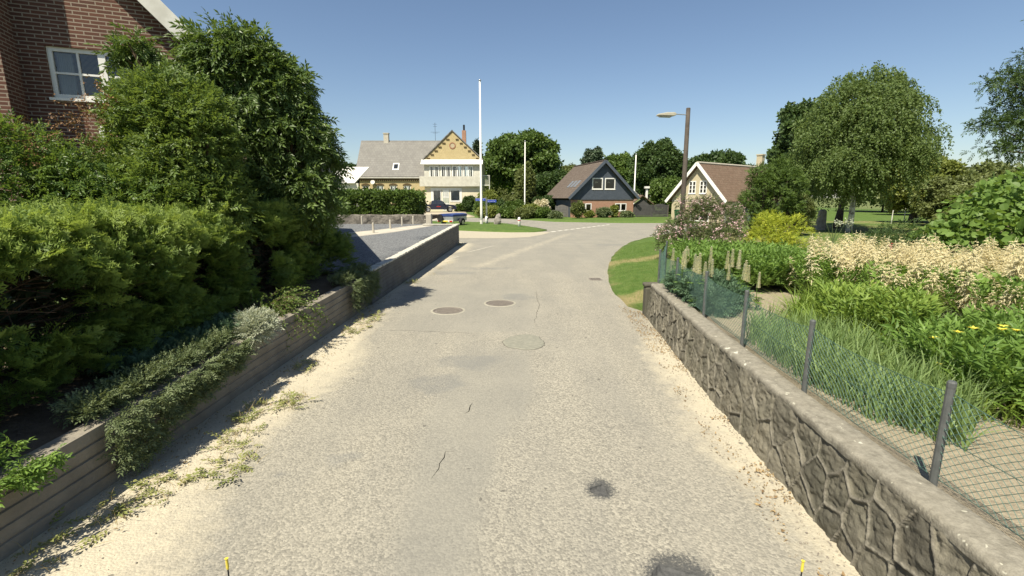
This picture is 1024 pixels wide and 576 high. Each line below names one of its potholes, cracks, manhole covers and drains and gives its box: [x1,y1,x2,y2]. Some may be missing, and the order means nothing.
pothole [651,564,704,576]
pothole [590,484,608,497]
manhole cover [431,307,465,315]
